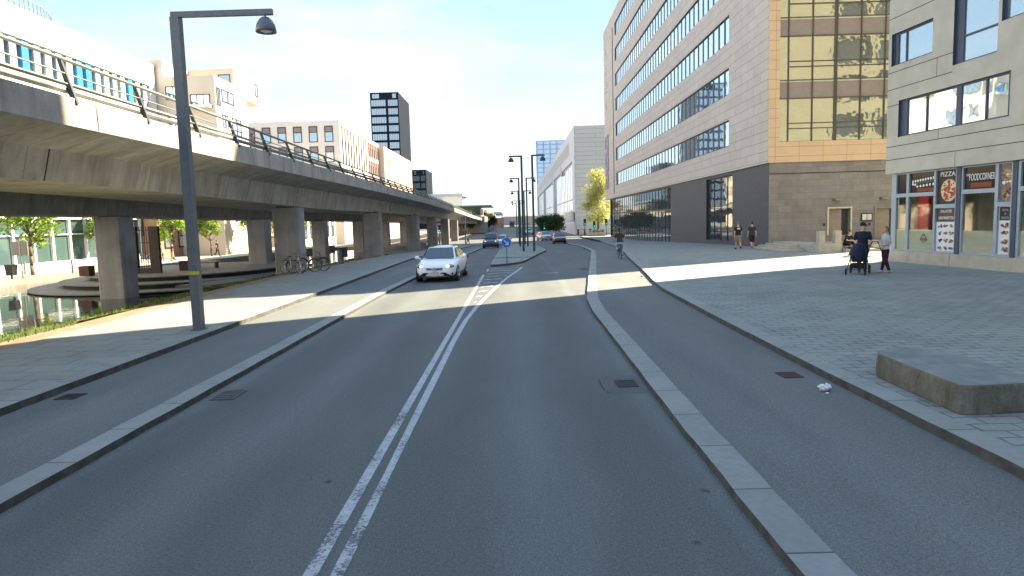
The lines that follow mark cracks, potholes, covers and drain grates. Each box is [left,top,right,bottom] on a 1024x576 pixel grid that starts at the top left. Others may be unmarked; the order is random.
drain grate [209,390,248,401]
drain grate [614,380,639,388]
